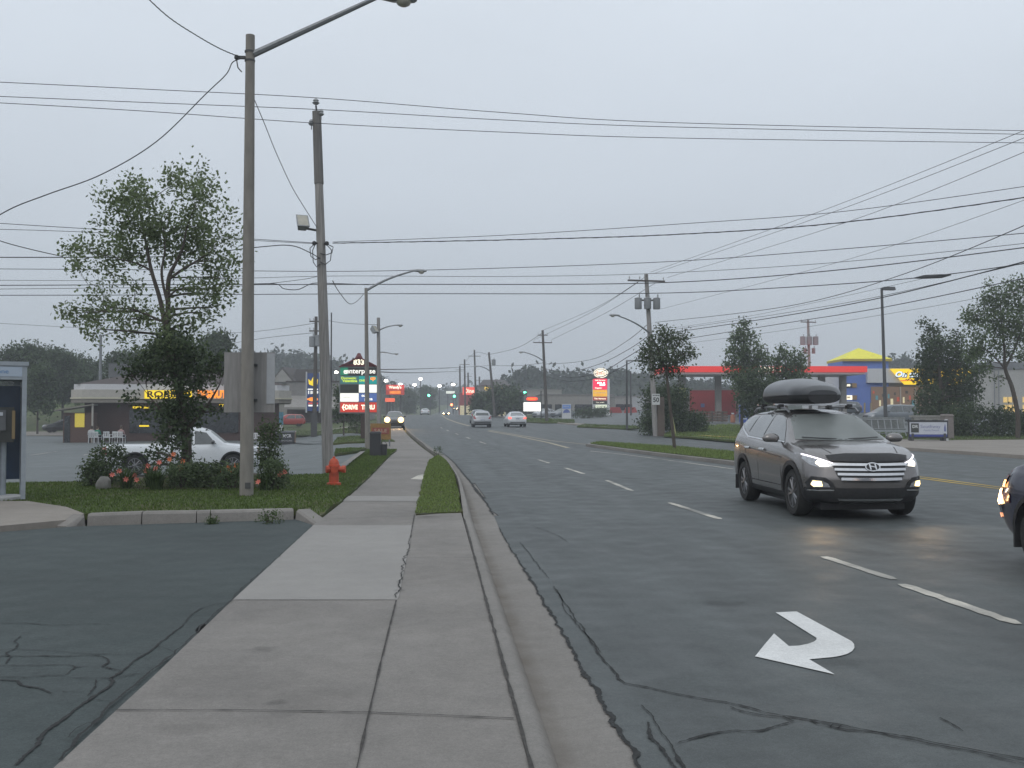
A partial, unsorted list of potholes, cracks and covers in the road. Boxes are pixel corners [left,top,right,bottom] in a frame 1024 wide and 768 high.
crack [0,526,312,765]
